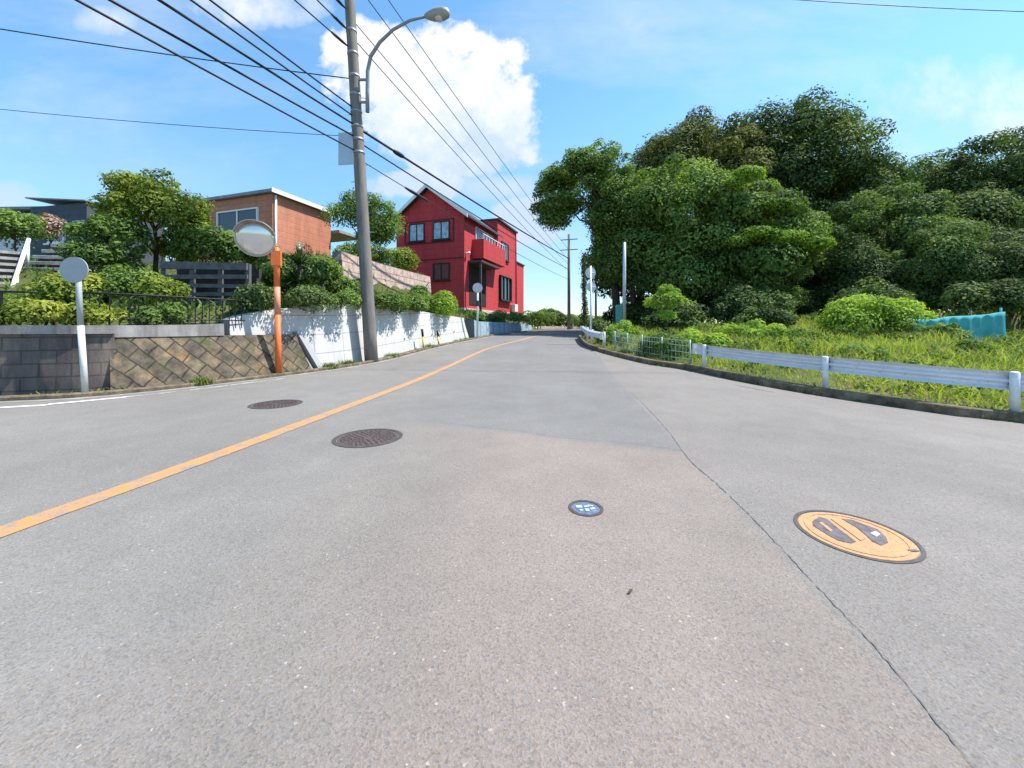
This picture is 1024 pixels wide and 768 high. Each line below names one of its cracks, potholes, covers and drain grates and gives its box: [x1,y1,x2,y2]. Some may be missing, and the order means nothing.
manhole cover [247,399,303,409]
manhole cover [332,428,403,448]
